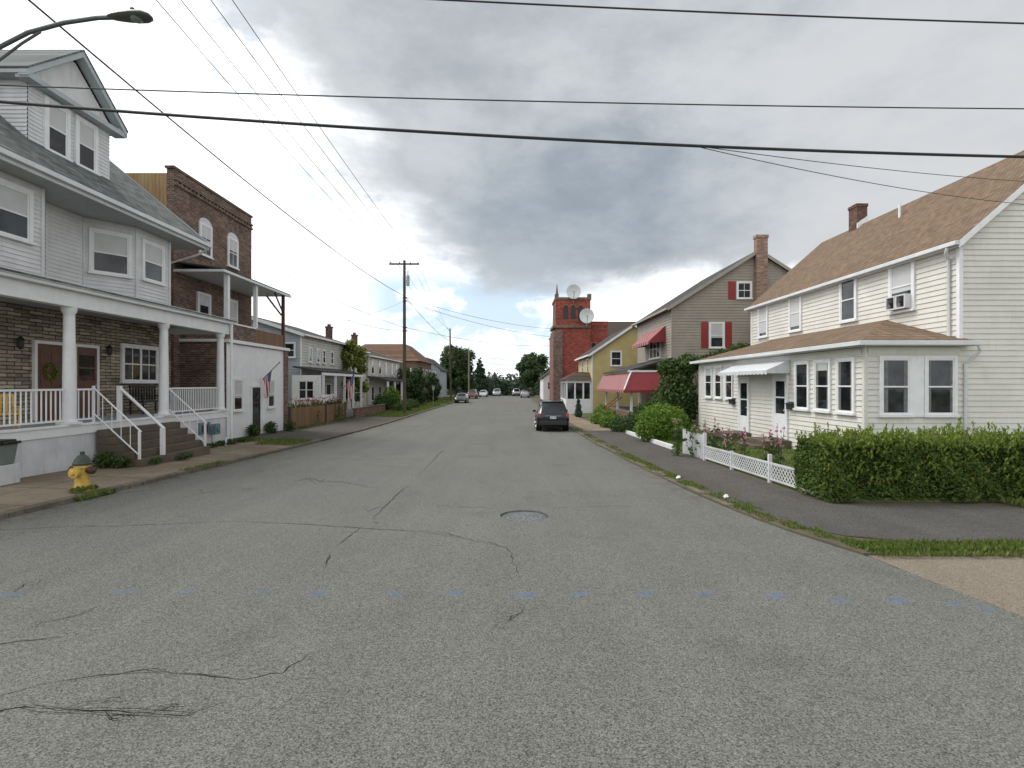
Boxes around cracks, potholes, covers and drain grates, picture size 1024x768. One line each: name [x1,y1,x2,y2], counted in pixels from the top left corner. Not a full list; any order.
crack [0,697,224,721]
crack [2,452,518,572]
crack [0,650,326,696]
manhole cover [500,510,548,522]
crack [1,600,120,644]
